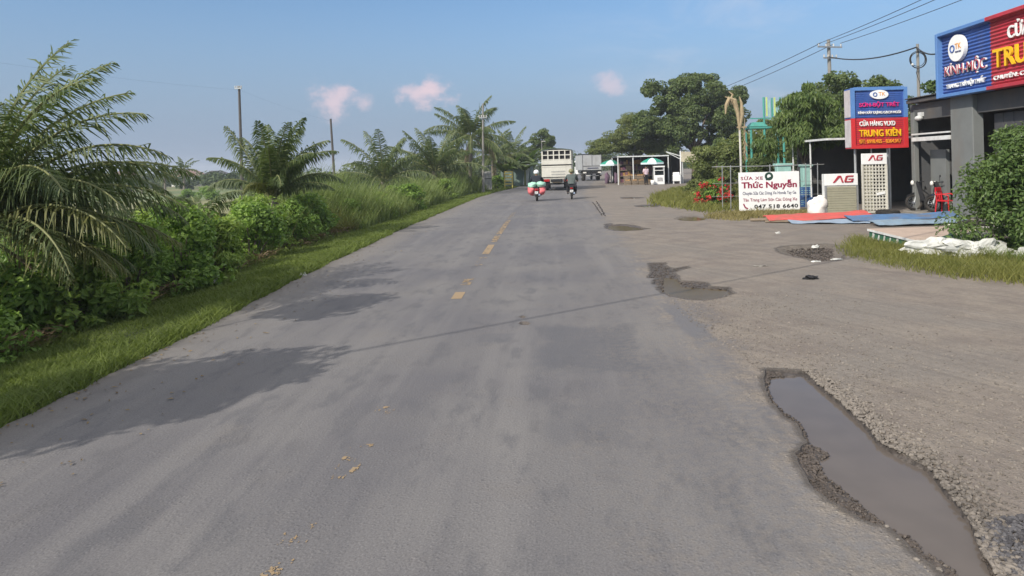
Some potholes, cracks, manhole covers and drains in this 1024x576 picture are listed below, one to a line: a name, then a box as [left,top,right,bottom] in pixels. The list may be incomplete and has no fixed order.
pothole [605,223,651,231]
pothole [761,368,997,576]
pothole [776,244,845,261]
pothole [647,262,735,300]
